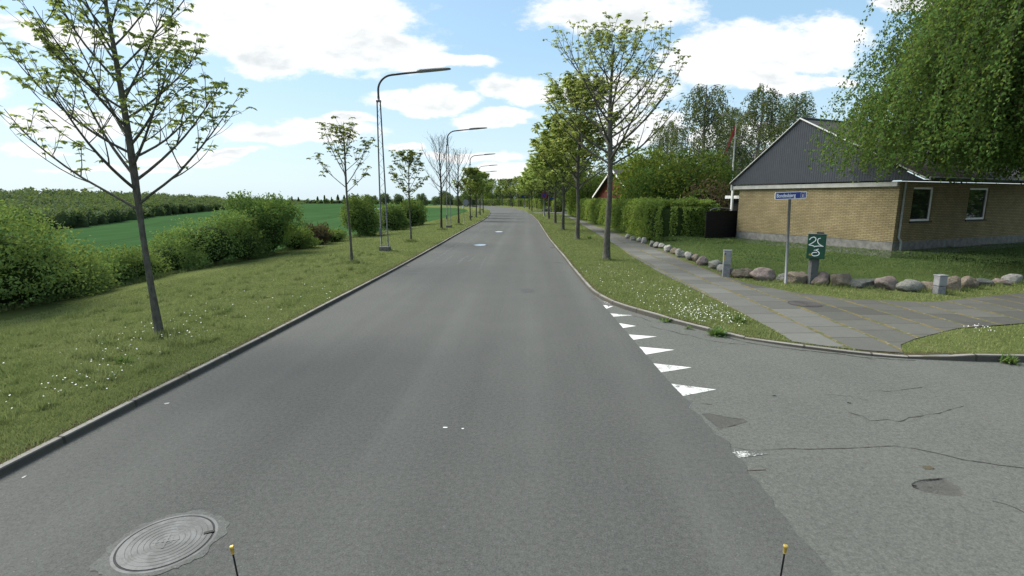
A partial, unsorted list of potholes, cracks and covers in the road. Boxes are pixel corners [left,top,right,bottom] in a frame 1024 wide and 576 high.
pothole [911,478,964,497]
crack [898,446,1023,468]
manhole cover [89,509,230,576]
crack [831,386,962,421]
